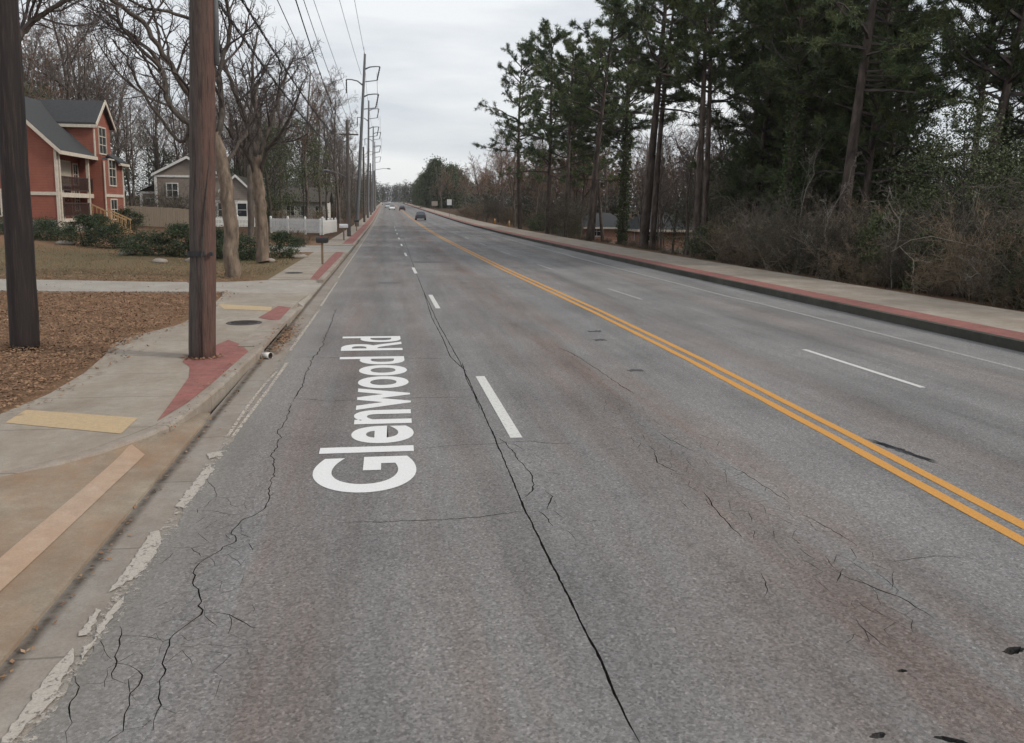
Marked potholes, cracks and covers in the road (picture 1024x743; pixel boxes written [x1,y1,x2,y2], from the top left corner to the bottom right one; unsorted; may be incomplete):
pothole [1001,647,1024,655]
crack [343,438,587,540]
crack [68,309,433,743]
crack [530,347,972,647]
